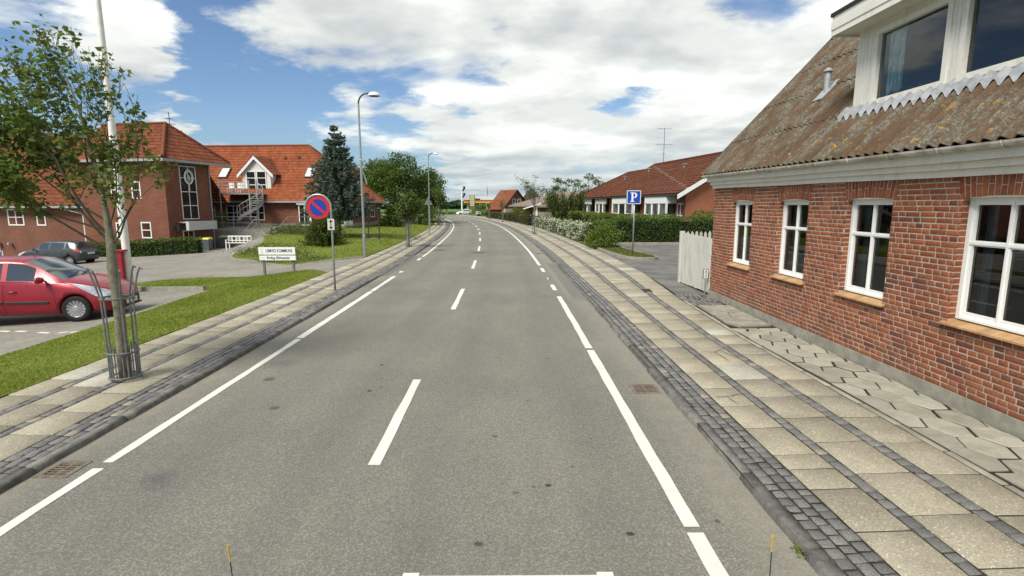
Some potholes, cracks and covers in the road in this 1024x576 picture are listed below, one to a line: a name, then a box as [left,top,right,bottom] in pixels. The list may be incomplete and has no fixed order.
drain grate [32,461,93,478]
drain grate [628,384,662,394]
